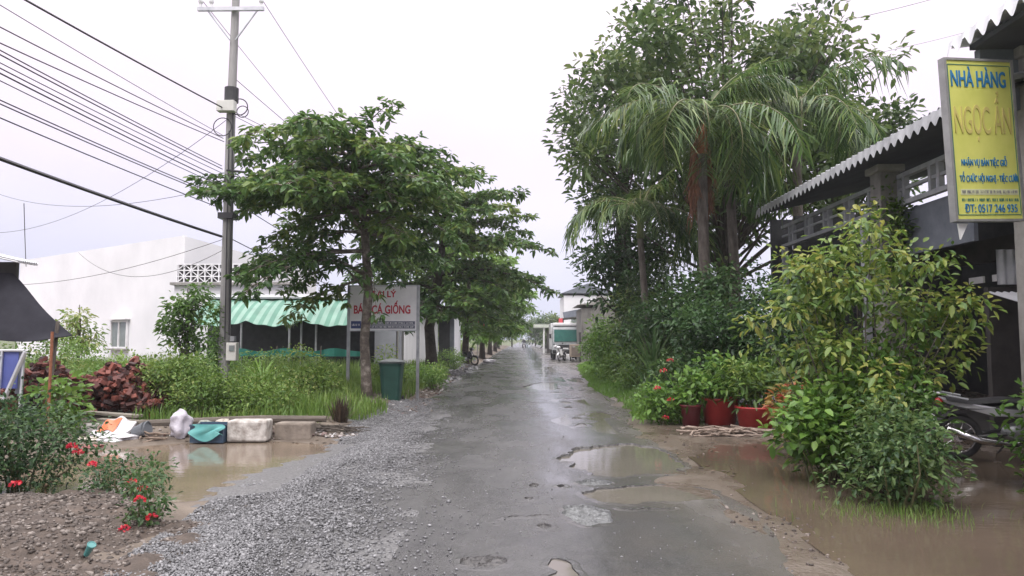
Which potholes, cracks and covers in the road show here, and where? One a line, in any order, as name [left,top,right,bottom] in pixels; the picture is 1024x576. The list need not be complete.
pothole [575,484,728,506]
pothole [539,556,588,576]
pothole [551,443,692,478]
pothole [530,522,559,531]
pothole [517,382,563,391]
pothole [451,554,516,571]
